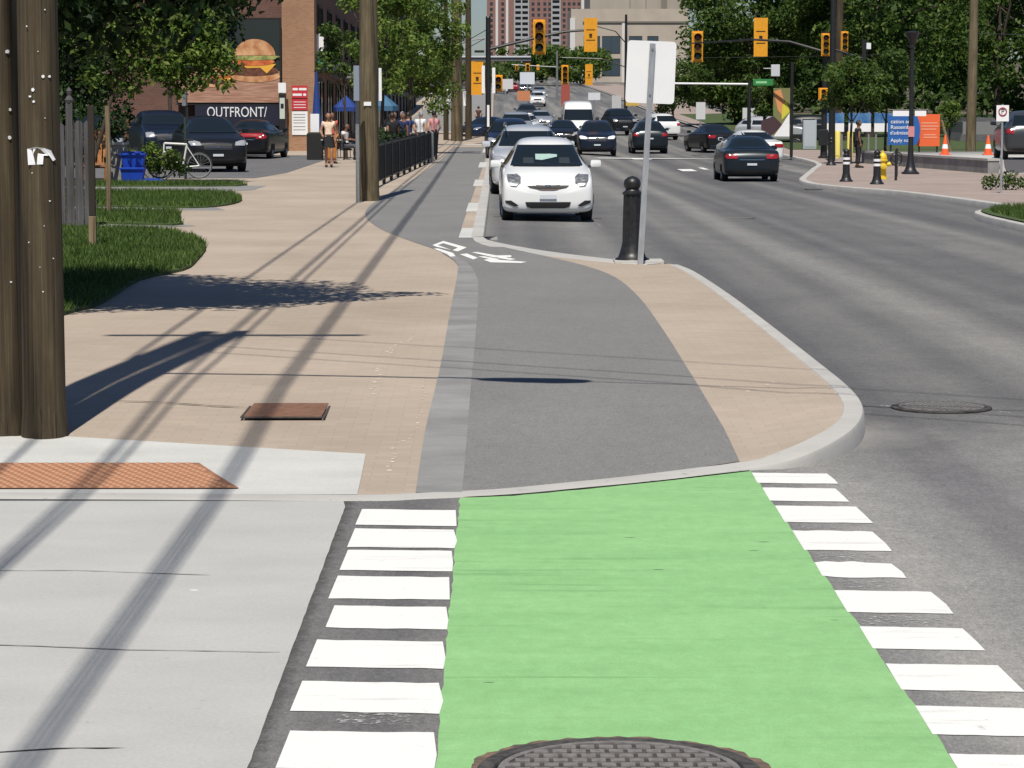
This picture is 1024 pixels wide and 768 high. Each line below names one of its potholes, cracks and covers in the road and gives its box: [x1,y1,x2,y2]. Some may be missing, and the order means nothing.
utility cover [240,403,331,418]
manhole cover [891,401,992,413]
manhole cover [471,736,771,768]
